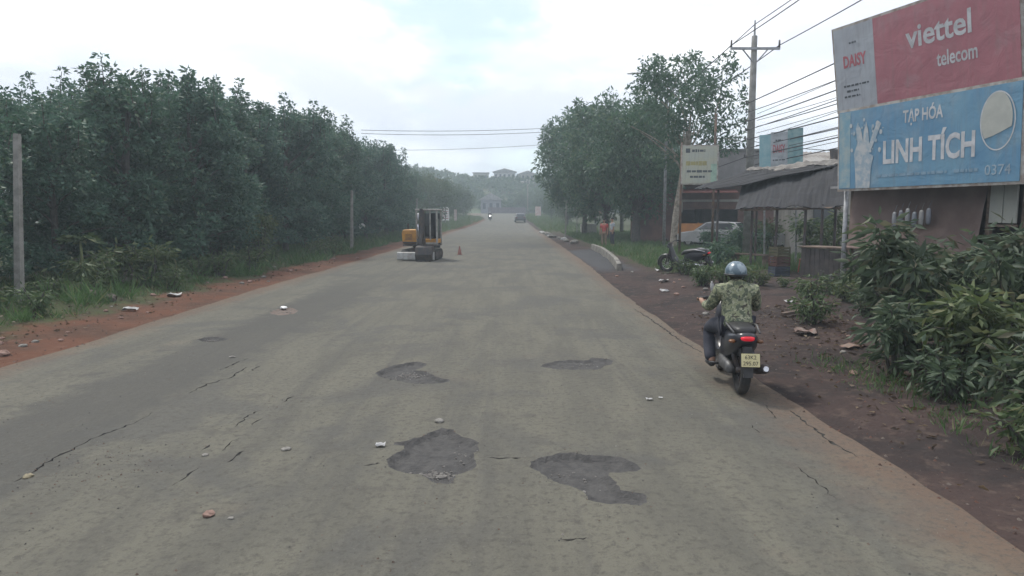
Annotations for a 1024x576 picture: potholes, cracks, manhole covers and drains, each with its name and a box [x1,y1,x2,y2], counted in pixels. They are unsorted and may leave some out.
crack [752,405,857,457]
pothole [541,358,614,370]
crack [202,411,261,462]
crack [190,358,260,393]
pothole [386,428,479,484]
pothole [529,452,647,506]
pothole [375,362,450,384]
crack [17,413,151,481]
